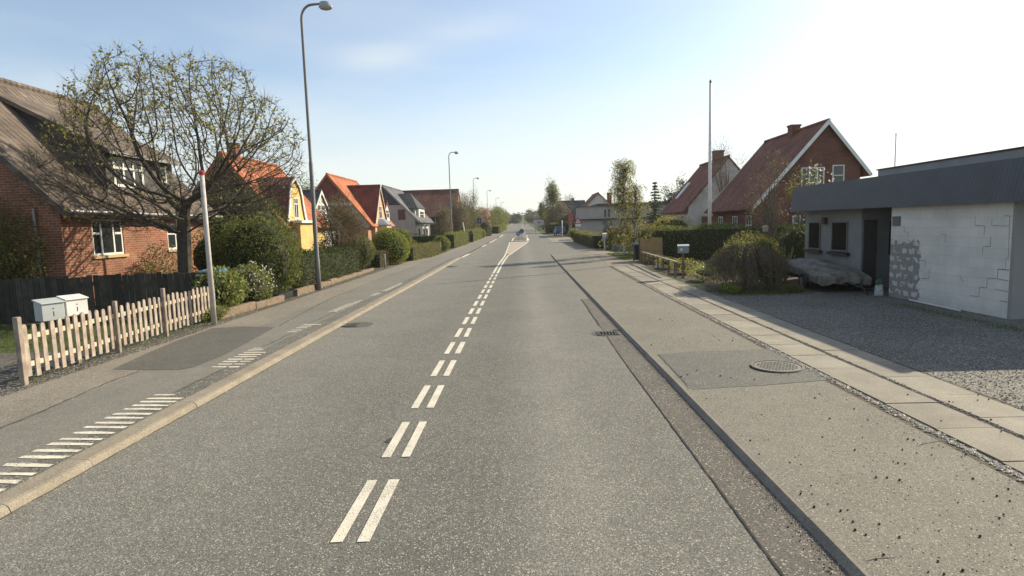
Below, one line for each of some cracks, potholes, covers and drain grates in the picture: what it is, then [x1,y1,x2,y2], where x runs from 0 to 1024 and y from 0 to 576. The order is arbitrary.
manhole cover [751,360,805,373]
